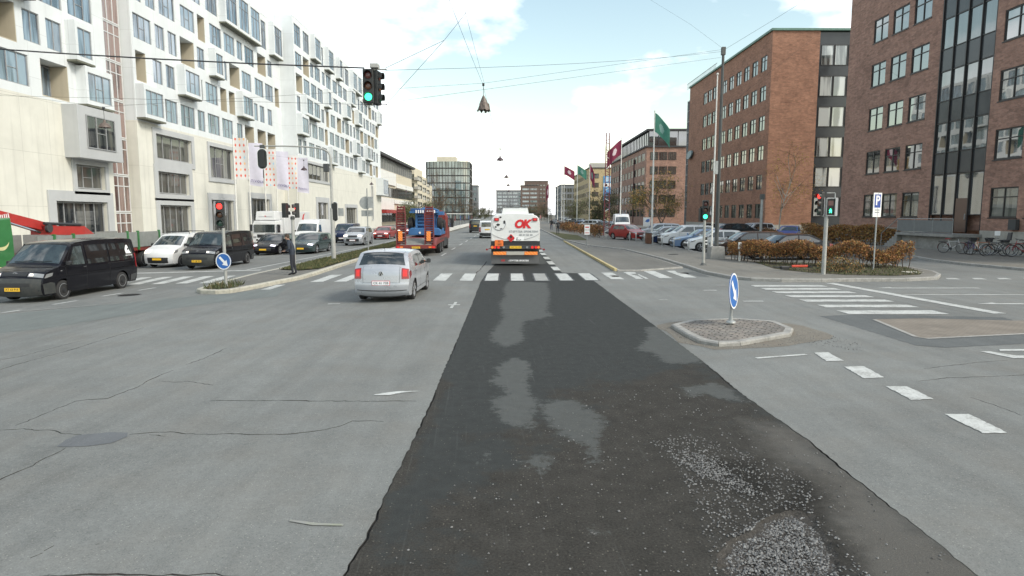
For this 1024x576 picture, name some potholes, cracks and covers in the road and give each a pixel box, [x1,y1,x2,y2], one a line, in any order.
crack [0,349,368,480]
pothole [717,510,840,576]
crack [0,329,138,370]
